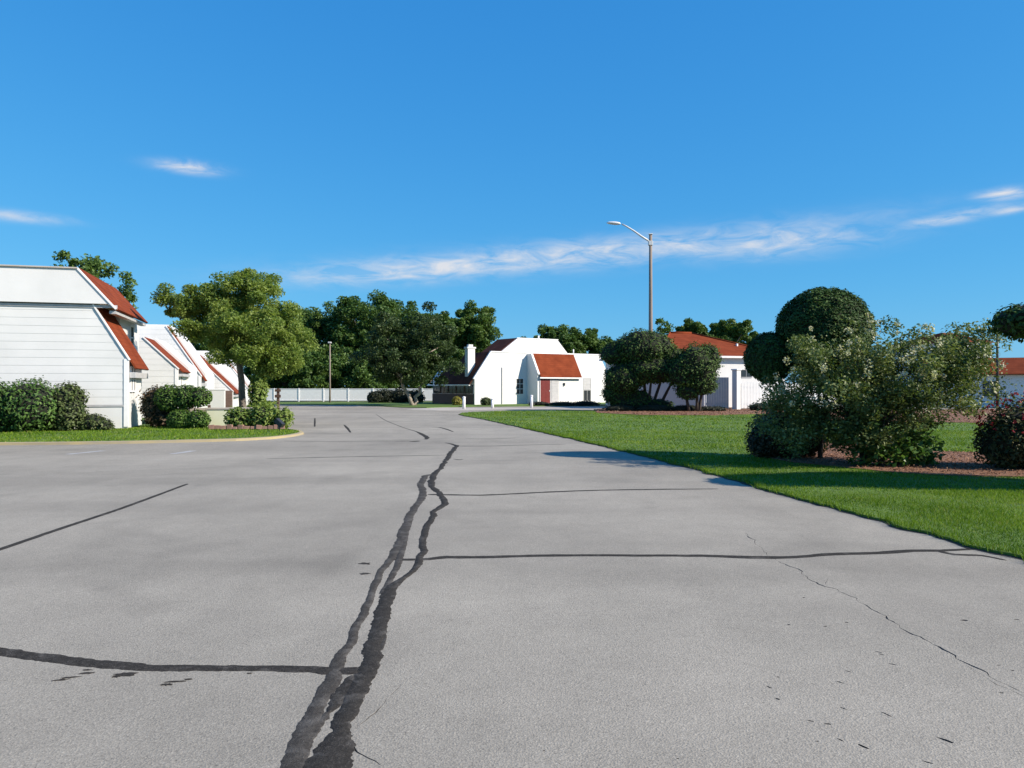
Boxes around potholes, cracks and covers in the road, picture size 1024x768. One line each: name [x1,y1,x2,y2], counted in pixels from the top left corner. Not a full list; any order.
crack [748,537,1024,696]
